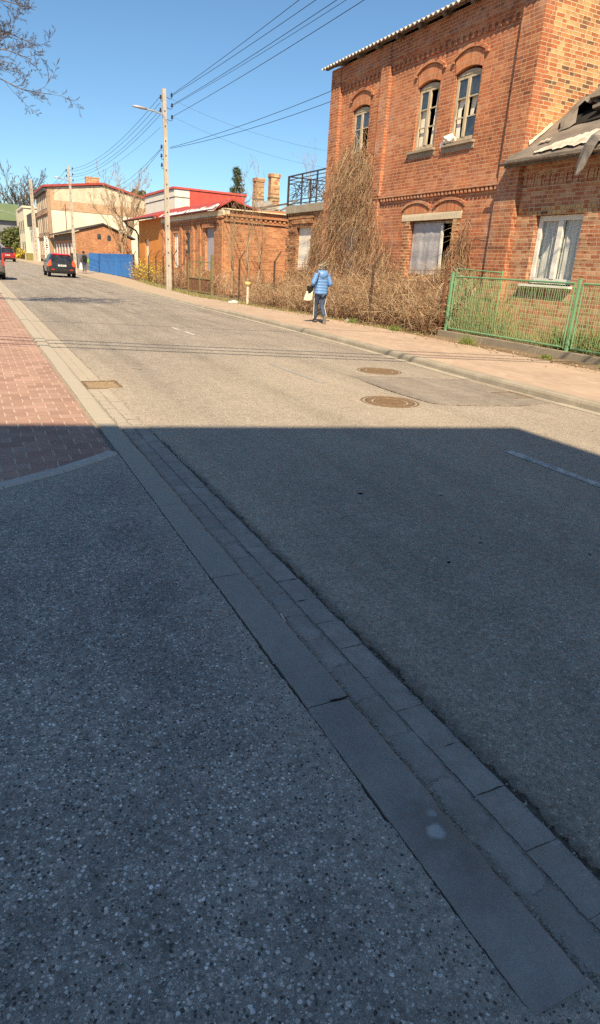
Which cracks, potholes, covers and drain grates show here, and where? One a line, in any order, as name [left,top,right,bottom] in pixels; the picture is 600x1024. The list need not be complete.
manhole cover [360,396,420,408]
manhole cover [357,367,402,375]
